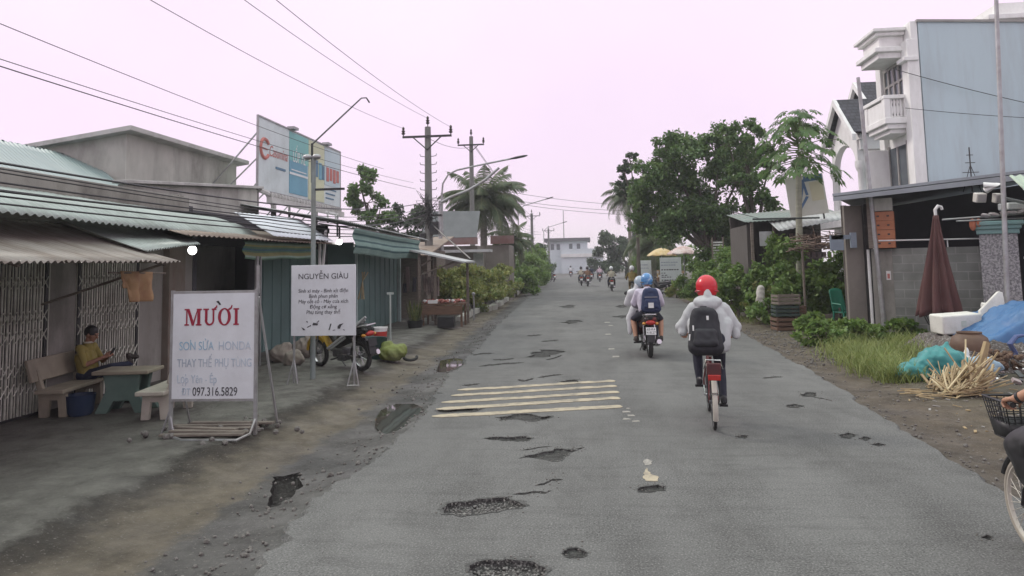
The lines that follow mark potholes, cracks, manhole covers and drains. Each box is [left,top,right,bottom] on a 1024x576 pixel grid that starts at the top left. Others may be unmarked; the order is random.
crack [514,479,563,495]
pothole [561,546,589,558]
pothole [527,349,566,358]
pothole [464,557,552,576]
pothole [636,484,666,493]
pothole [438,496,529,517]
pothole [521,448,578,462]
pothole [268,472,303,507]
pothole [496,413,554,421]
